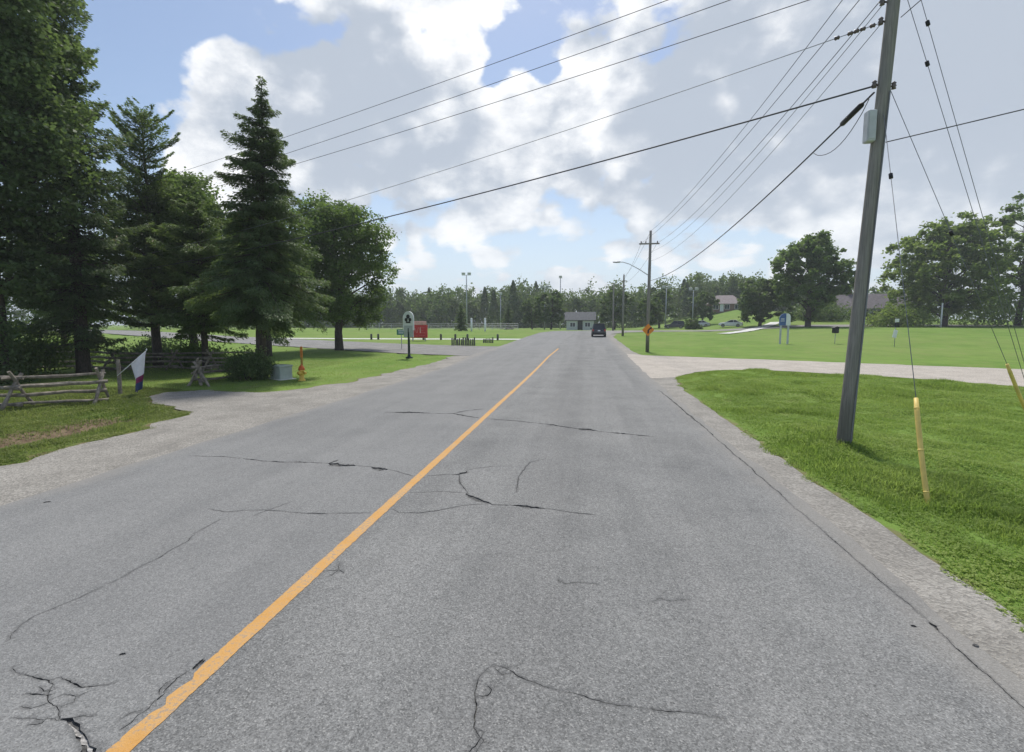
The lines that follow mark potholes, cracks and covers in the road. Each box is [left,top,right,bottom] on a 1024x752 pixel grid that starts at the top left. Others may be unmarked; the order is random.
crack [395,409,478,418]
crack [395,464,592,515]
crack [495,419,645,436]
crack [470,665,697,752]
crack [13,669,100,752]
crack [10,503,325,639]
